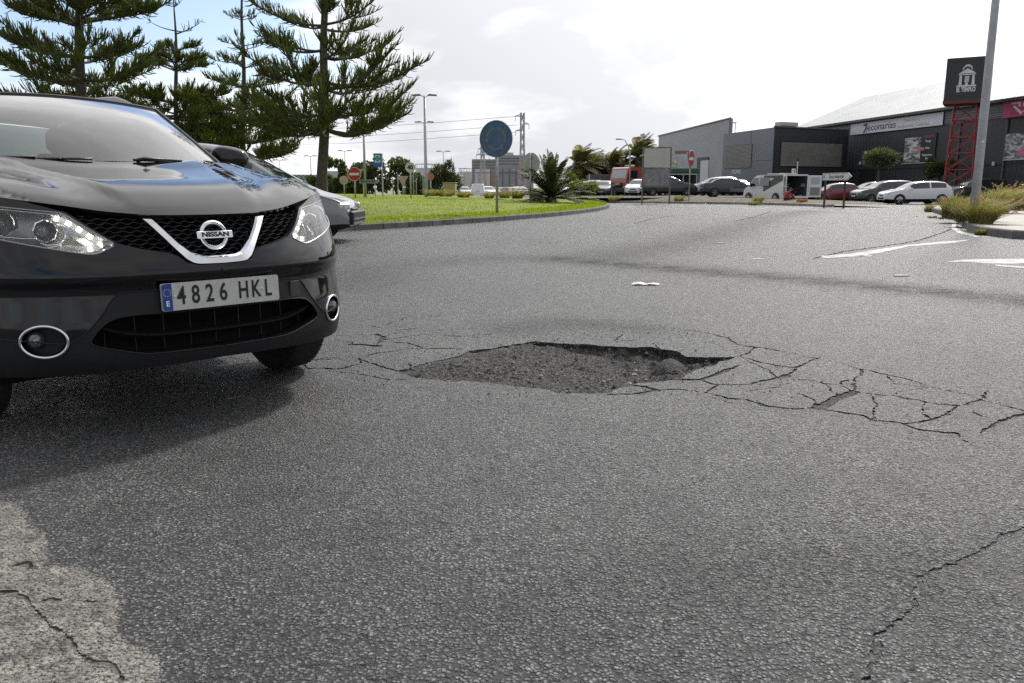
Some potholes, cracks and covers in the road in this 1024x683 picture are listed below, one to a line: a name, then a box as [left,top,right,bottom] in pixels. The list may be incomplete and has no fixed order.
crack [230,317,488,382]
crack [606,330,1024,445]
pothole [399,341,738,394]
